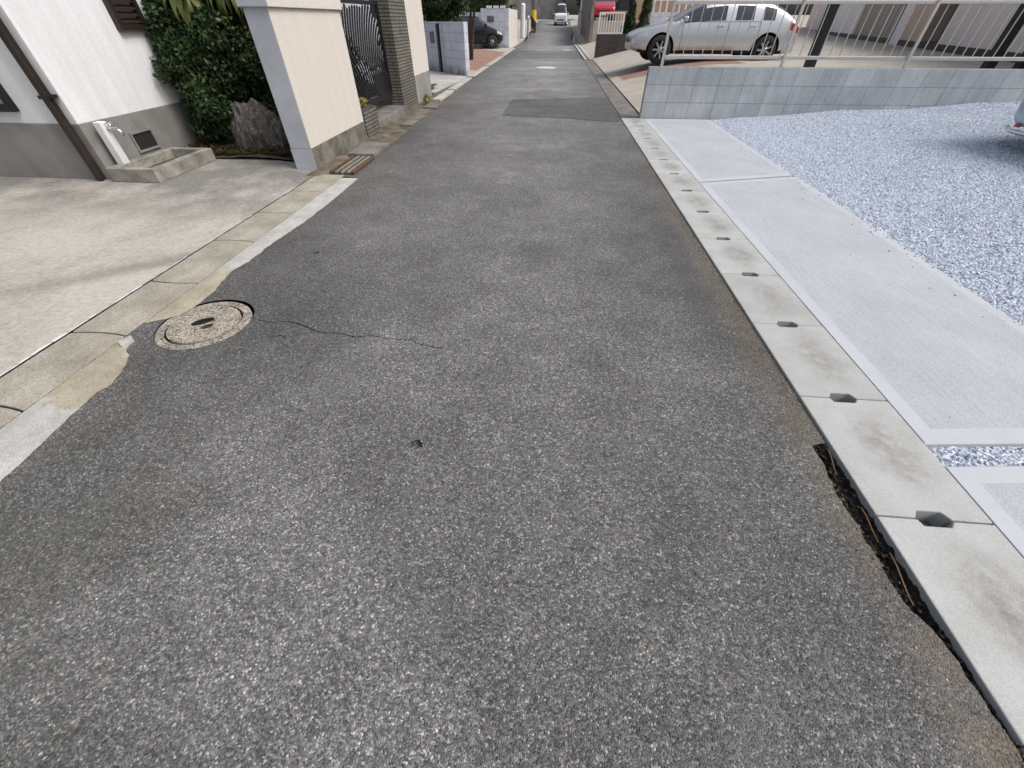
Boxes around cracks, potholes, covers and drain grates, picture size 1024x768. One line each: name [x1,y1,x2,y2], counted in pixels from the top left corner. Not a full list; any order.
manhole cover [154,302,254,350]
drain grate [329,156,375,174]
crack [253,318,444,349]
